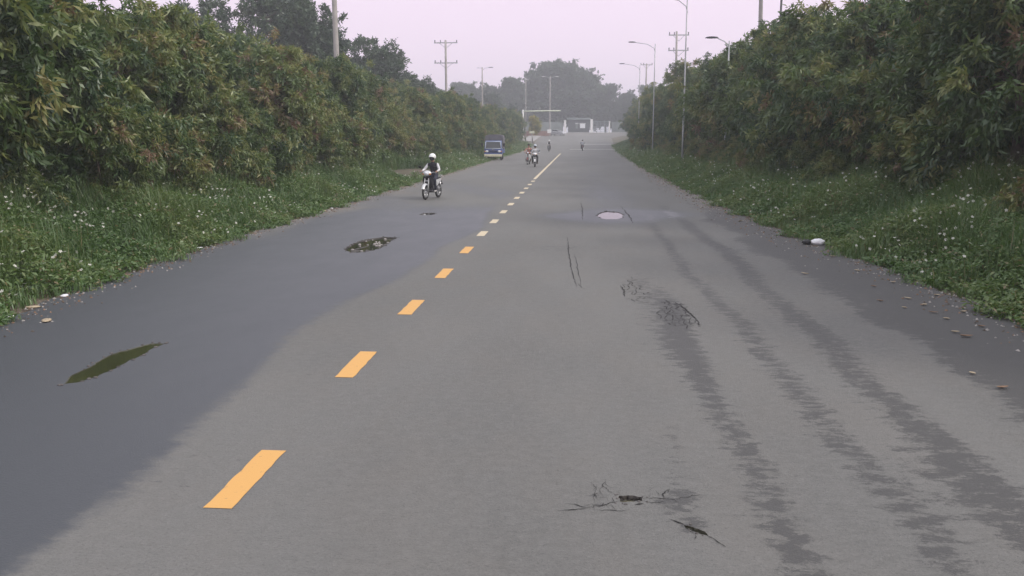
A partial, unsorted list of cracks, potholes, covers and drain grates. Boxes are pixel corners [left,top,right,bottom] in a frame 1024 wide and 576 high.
pothole [57,342,169,386]
crack [558,482,692,511]
crack [567,238,585,289]
pothole [343,236,397,253]
